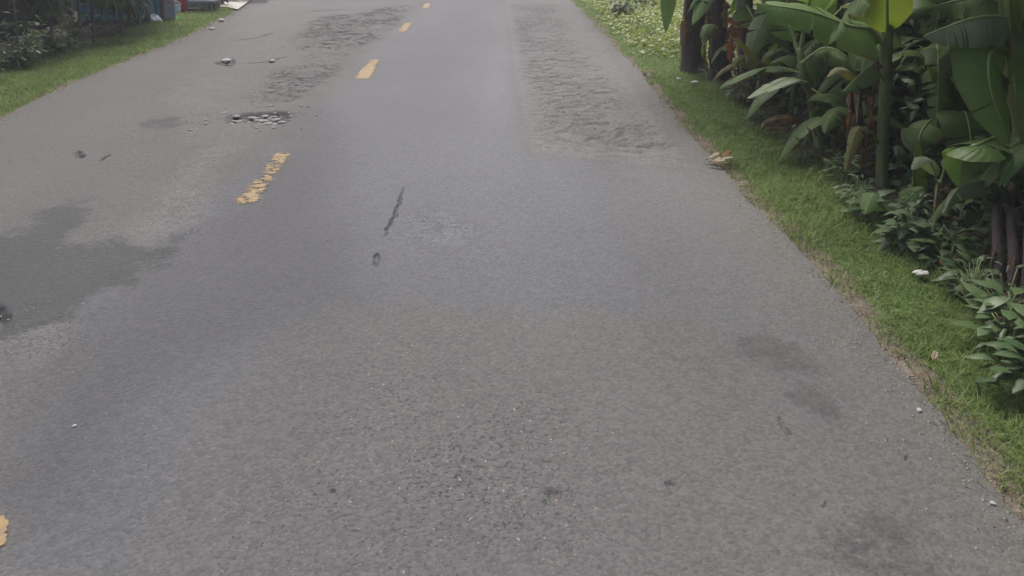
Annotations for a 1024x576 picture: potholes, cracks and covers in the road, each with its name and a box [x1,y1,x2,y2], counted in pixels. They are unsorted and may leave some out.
pothole [71,150,88,159]
crack [372,185,456,267]
pothole [188,105,318,132]
